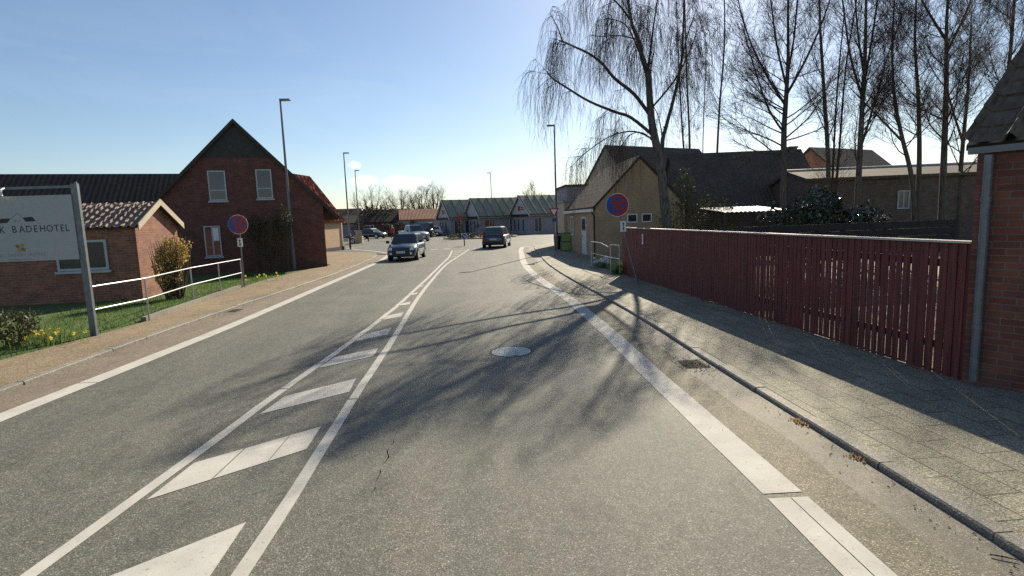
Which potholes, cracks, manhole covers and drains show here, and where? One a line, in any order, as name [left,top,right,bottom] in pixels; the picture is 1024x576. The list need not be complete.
drain grate [678,360,711,369]
manhole cover [489,346,533,357]
